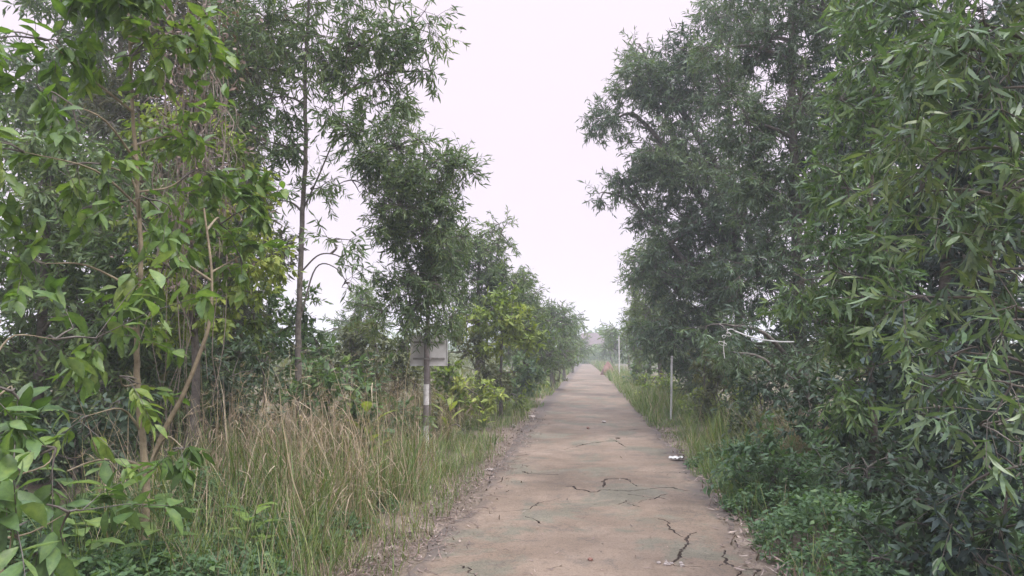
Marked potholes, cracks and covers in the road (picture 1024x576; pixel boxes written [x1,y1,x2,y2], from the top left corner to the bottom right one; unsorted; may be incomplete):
crack [661,519,698,567]
crack [485,471,688,524]
